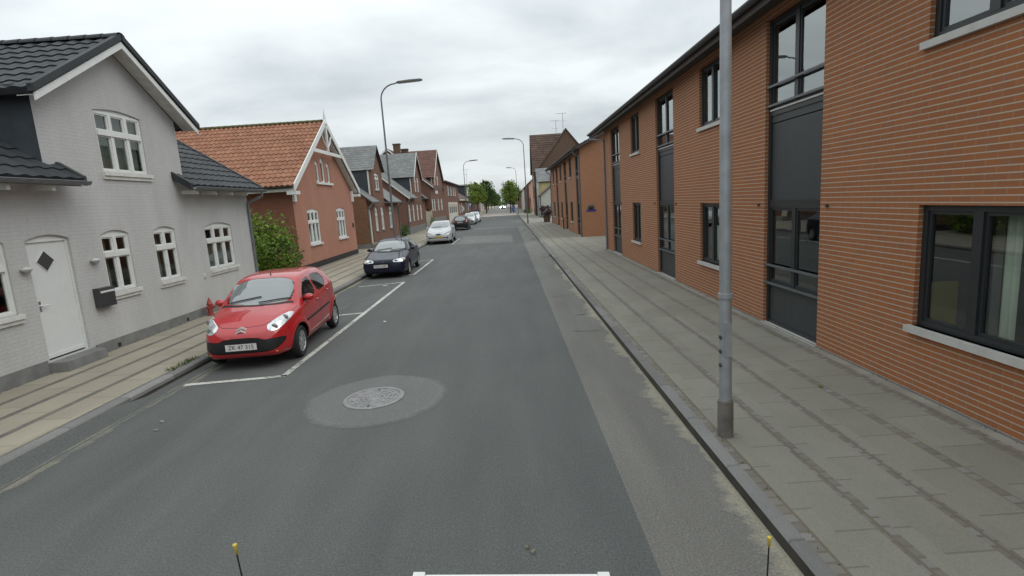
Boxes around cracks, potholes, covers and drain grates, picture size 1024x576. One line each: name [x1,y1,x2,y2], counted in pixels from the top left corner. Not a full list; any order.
manhole cover [343,387,404,410]
